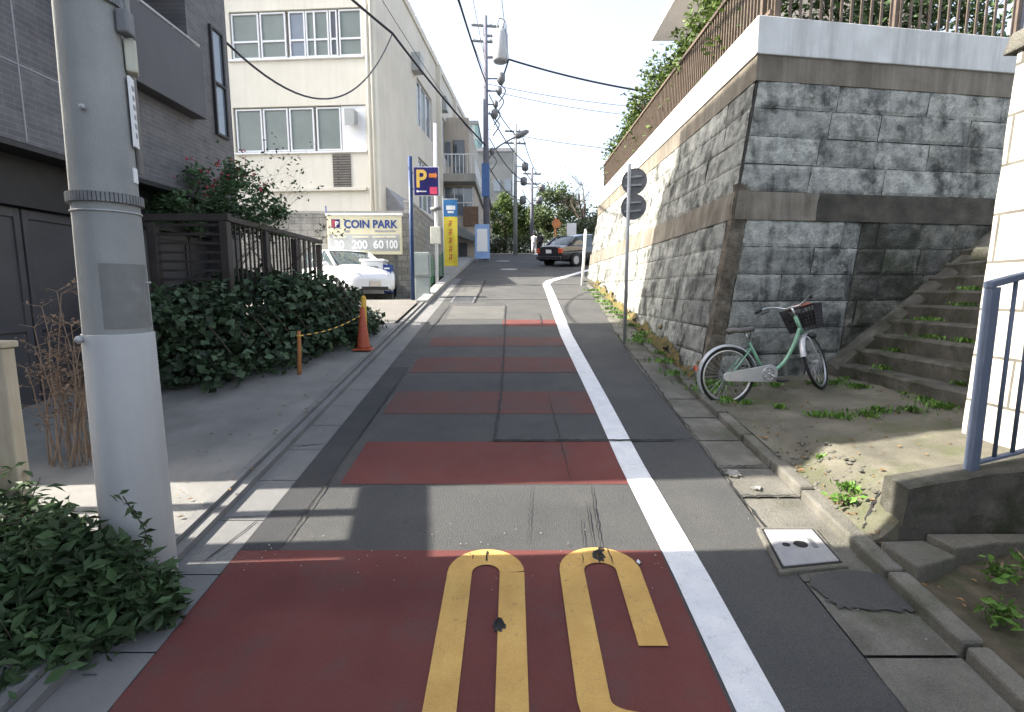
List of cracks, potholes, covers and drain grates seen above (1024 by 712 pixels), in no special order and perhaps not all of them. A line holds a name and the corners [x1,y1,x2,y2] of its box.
crack [861,490,879,528]
manhole cover [756,527,848,579]
